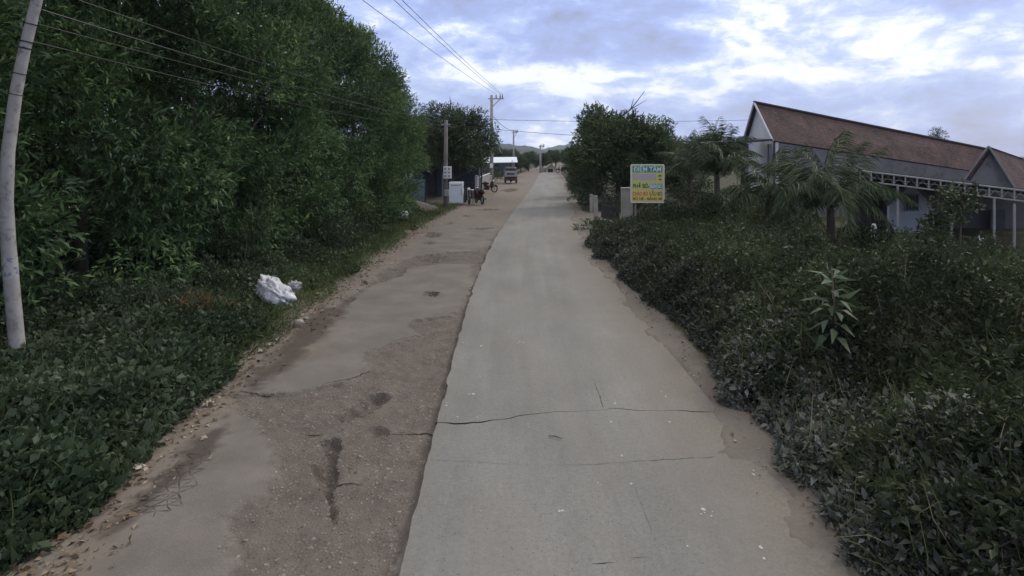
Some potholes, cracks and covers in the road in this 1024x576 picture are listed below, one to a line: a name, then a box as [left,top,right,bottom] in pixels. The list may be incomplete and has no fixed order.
crack [128,452,211,519]
crack [397,383,694,436]
pothole [216,287,473,576]
